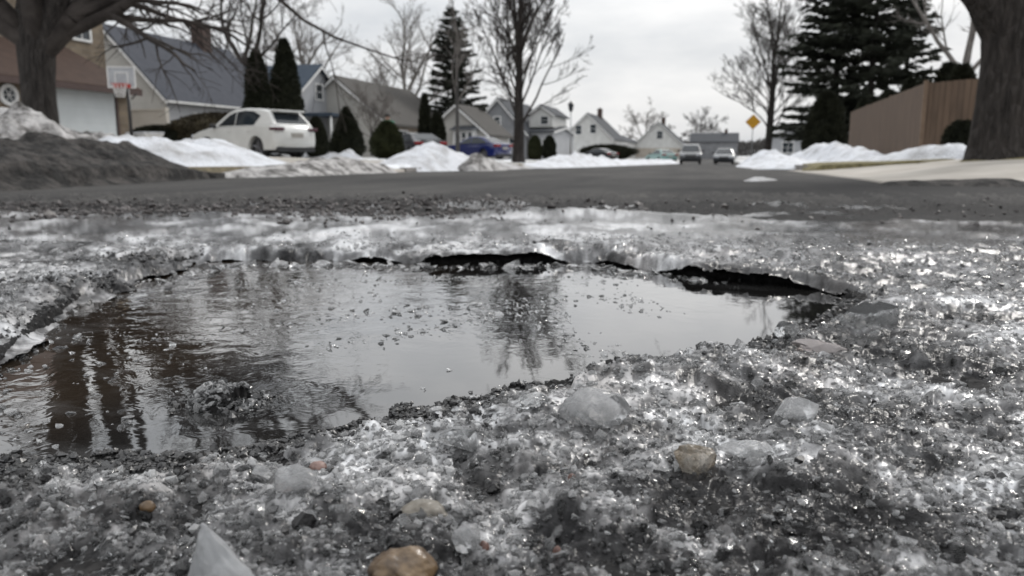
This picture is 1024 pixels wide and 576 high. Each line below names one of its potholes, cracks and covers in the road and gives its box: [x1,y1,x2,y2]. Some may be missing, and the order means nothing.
pothole [0,254,858,459]
